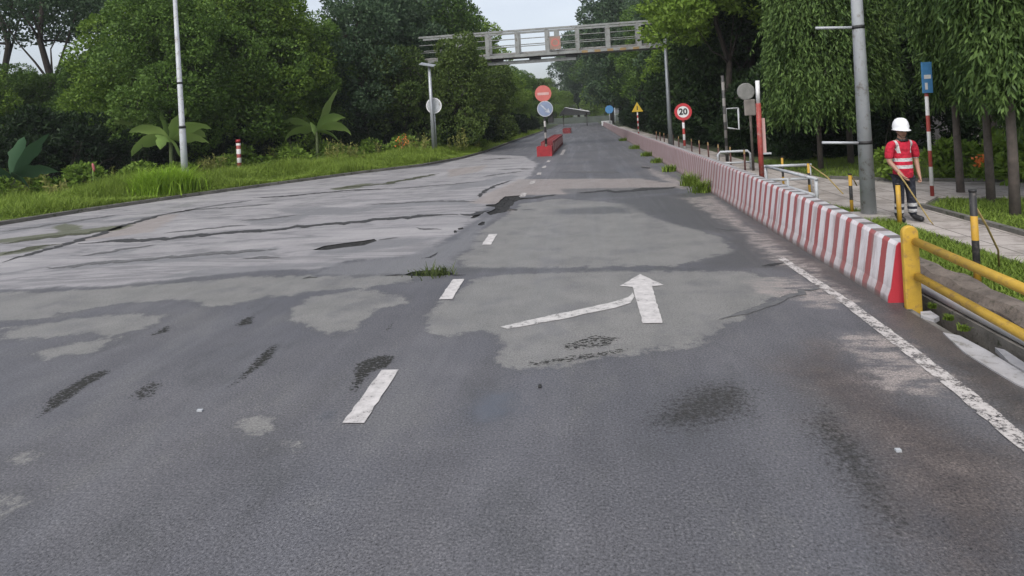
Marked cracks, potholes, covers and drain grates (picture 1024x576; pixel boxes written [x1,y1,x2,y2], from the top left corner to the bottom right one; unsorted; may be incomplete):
crack [721,286,831,319]
pothole [486,195,533,215]
crack [1,158,557,268]
pothole [314,239,376,250]
